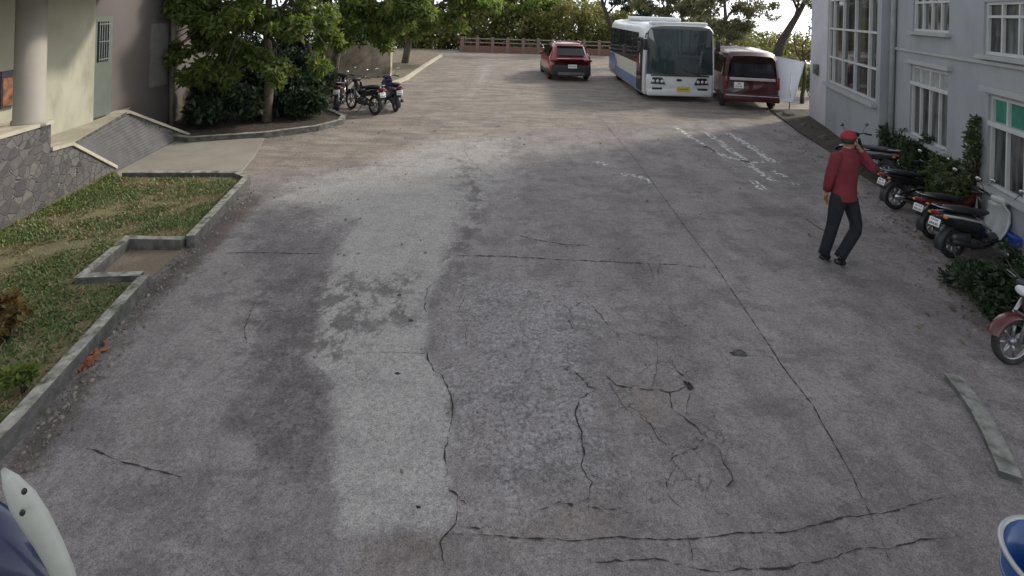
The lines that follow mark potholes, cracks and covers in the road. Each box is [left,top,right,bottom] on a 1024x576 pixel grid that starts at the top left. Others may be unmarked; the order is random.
crack [427,354,482,572]
crack [535,287,733,511]
crack [86,448,189,479]
